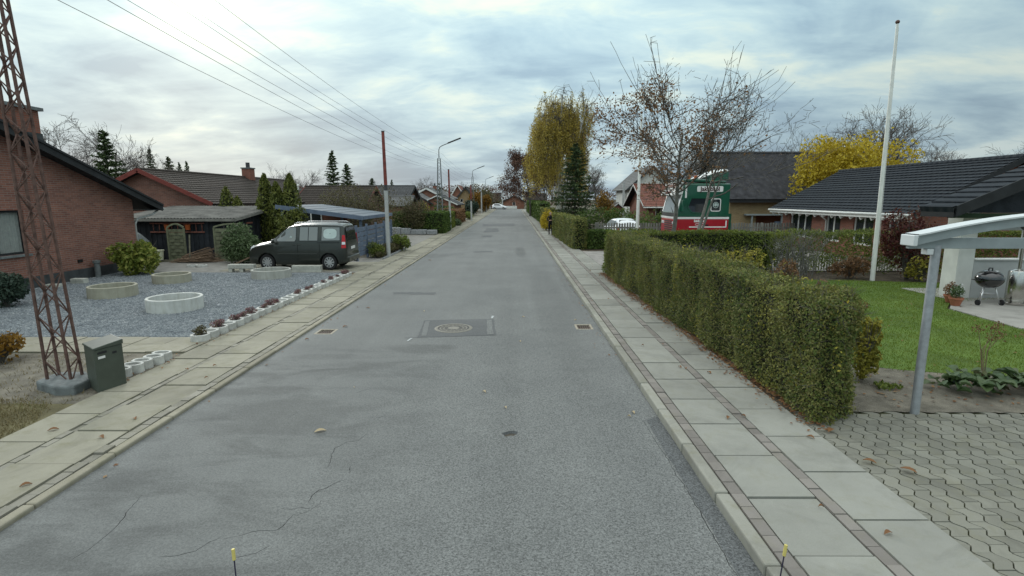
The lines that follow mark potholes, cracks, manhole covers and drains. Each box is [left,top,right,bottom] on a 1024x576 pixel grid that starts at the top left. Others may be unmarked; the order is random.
manhole cover [434,324,473,333]
crack [161,417,380,558]
